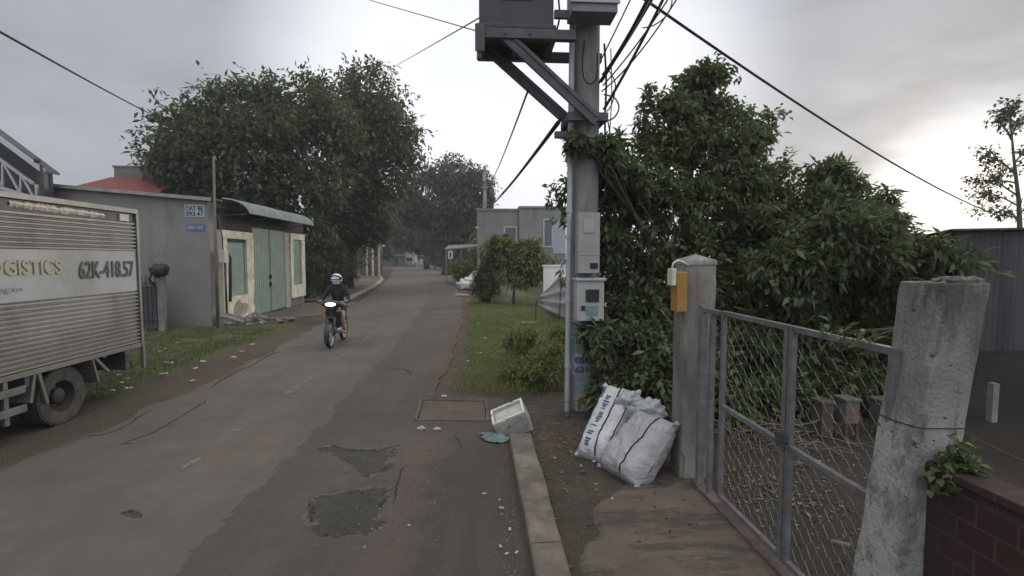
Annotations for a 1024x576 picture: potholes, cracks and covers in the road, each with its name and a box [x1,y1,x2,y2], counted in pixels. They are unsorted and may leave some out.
manhole cover [414,398,490,421]
crack [89,351,280,445]
pothole [300,485,394,539]
